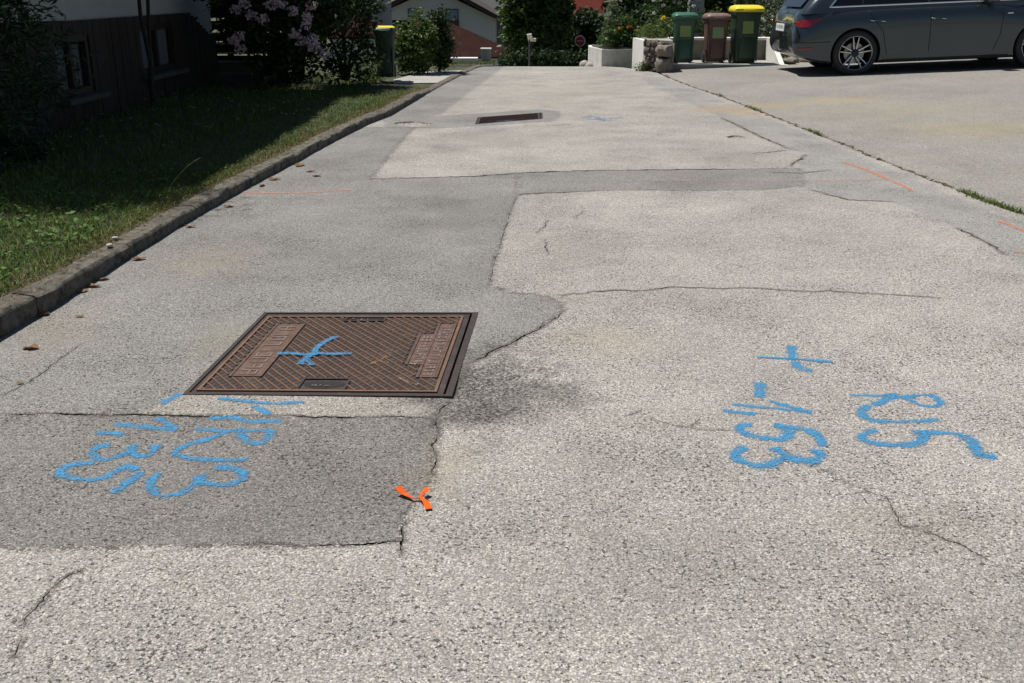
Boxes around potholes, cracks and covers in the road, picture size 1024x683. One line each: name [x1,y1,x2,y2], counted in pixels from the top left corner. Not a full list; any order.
crack [722,118,826,173]
crack [11,570,81,658]
crack [564,287,934,298]
crack [431,402,450,474]
manhole cover [182,312,478,399]
crack [815,463,1020,577]
